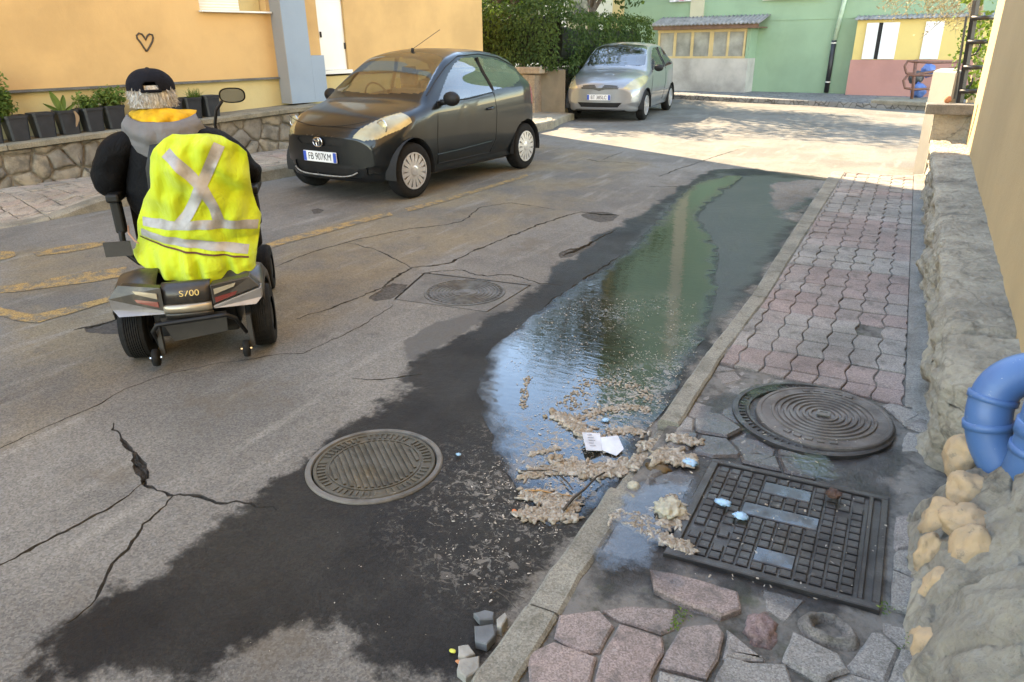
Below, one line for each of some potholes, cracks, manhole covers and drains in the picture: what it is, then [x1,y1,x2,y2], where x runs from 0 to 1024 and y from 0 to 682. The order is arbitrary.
pothole [559,241,596,258]
pothole [581,212,619,222]
crack [275,203,621,319]
manhole cover [396,273,529,312]
manhole cover [305,429,443,505]
crack [0,423,277,624]
manhole cover [732,382,896,460]
